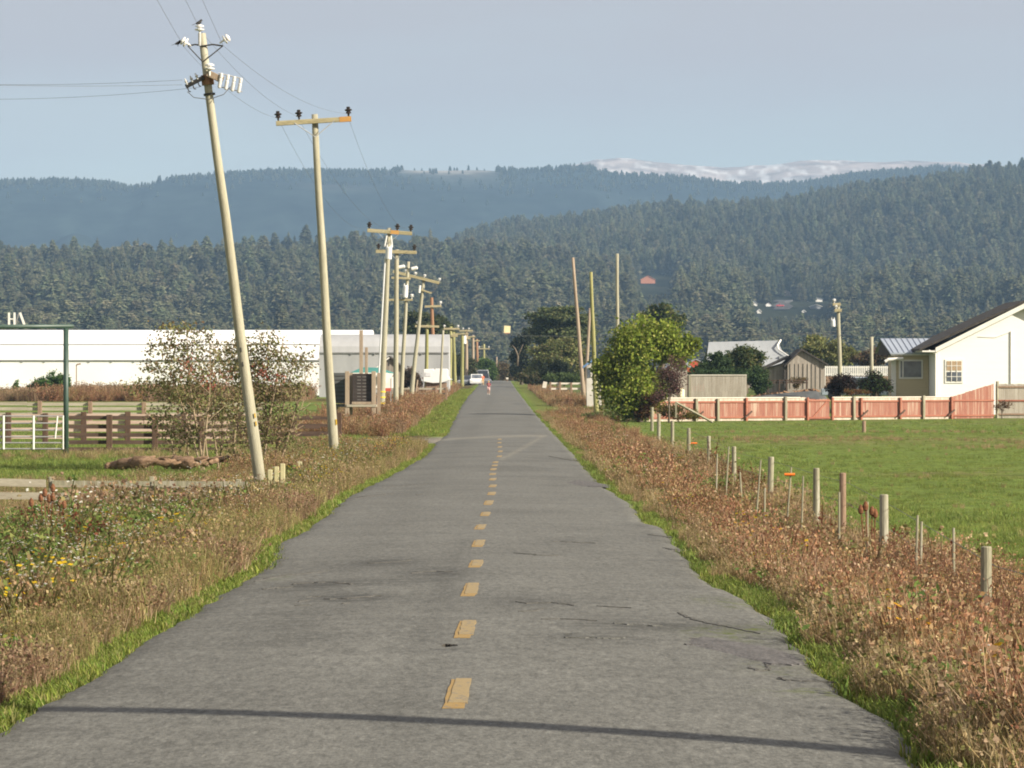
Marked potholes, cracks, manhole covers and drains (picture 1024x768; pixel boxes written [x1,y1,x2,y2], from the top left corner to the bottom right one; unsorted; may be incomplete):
crack [748,663,836,683]
crack [677,612,760,634]
crack [515,601,631,621]
